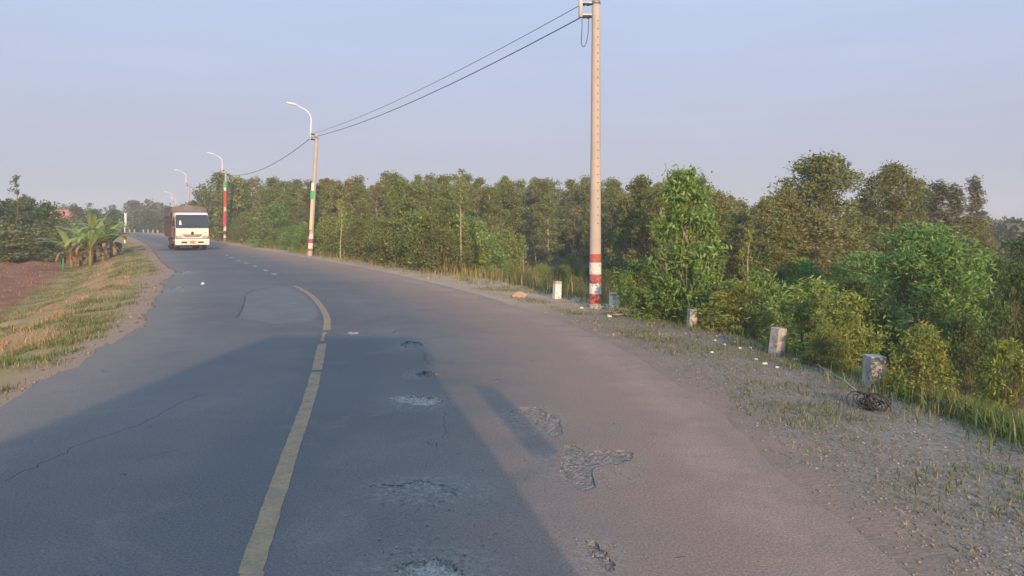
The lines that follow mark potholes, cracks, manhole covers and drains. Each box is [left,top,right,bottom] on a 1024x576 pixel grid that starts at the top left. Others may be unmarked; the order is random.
pothole [585,540,616,572]
pothole [394,557,465,576]
pothole [508,407,563,438]
pothole [558,445,634,492]
crack [9,396,198,479]
pothole [369,480,459,499]
pothole [387,395,444,406]
